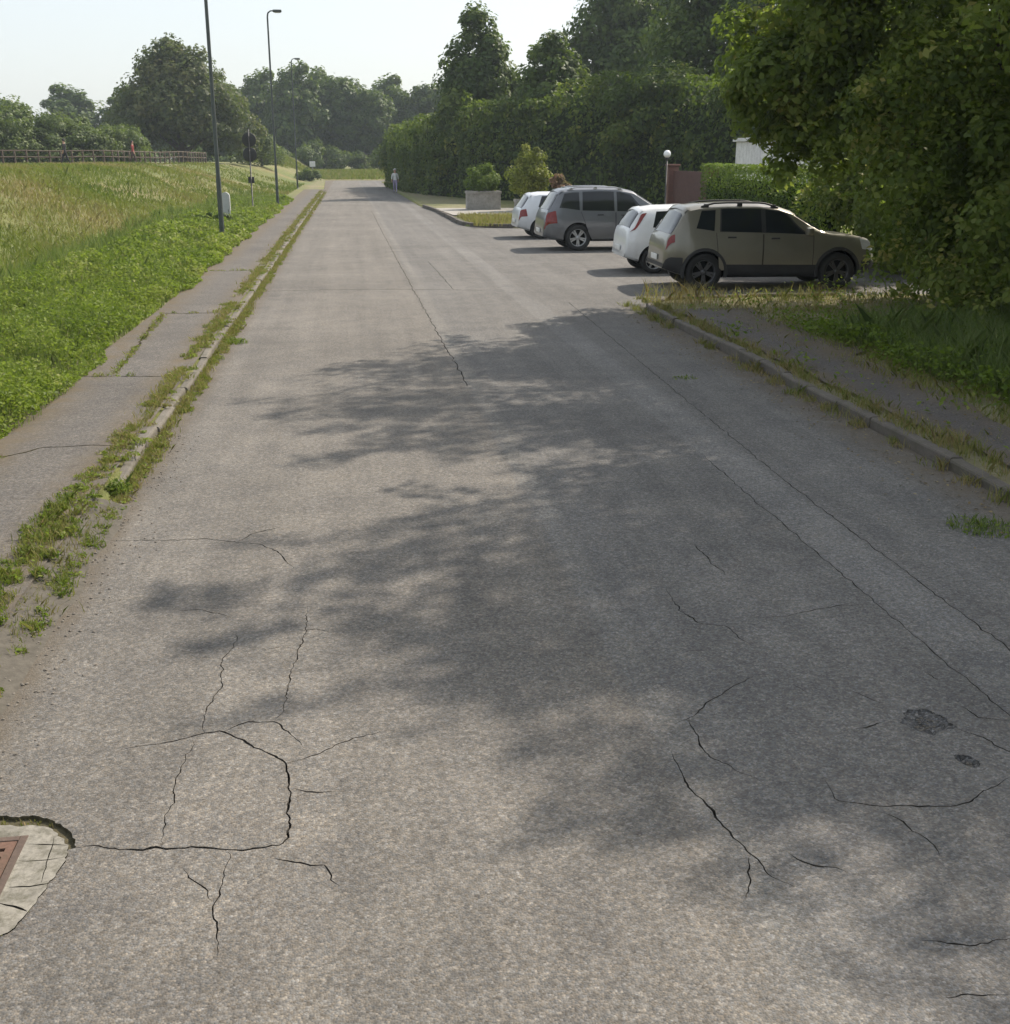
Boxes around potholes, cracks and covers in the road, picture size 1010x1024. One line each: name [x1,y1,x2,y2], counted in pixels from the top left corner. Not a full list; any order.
pothole [954,754,980,768]
pothole [900,709,957,736]
crack [122,527,294,568]
crack [922,938,1010,946]
crack [666,588,863,648]
crack [959,706,1010,752]
crack [76,606,380,955]
crack [825,777,1010,853]
crack [672,674,844,895]
